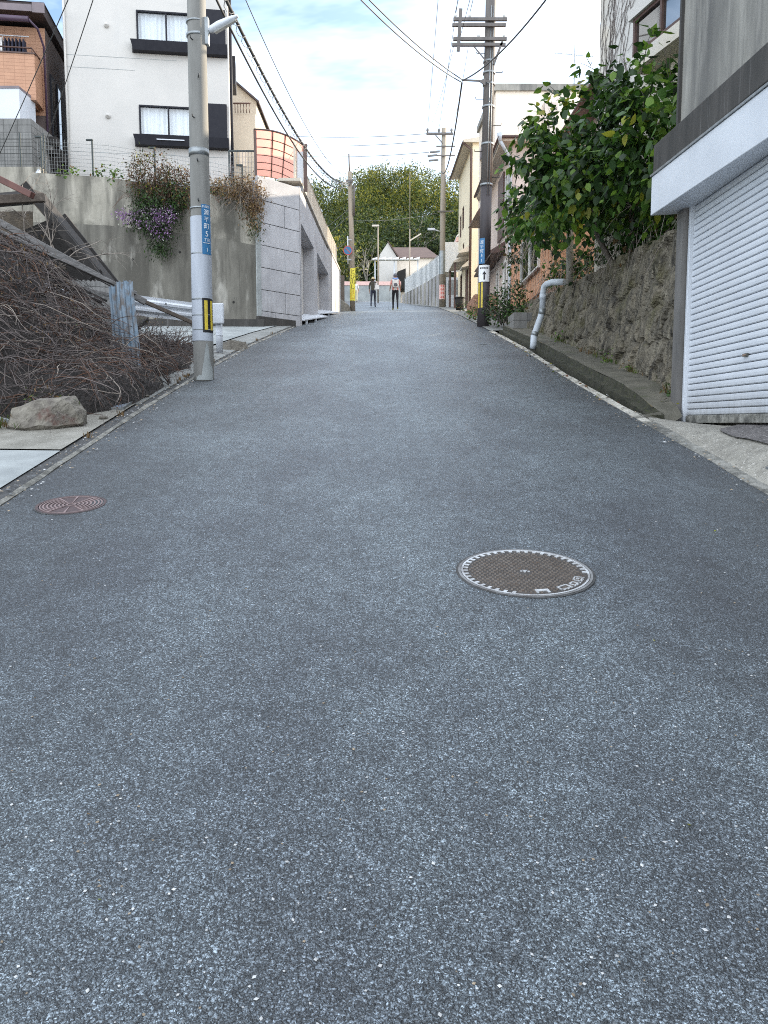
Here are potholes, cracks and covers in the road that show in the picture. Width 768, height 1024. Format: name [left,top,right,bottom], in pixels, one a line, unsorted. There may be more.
manhole cover [33,495,108,515]
manhole cover [456,549,596,599]
